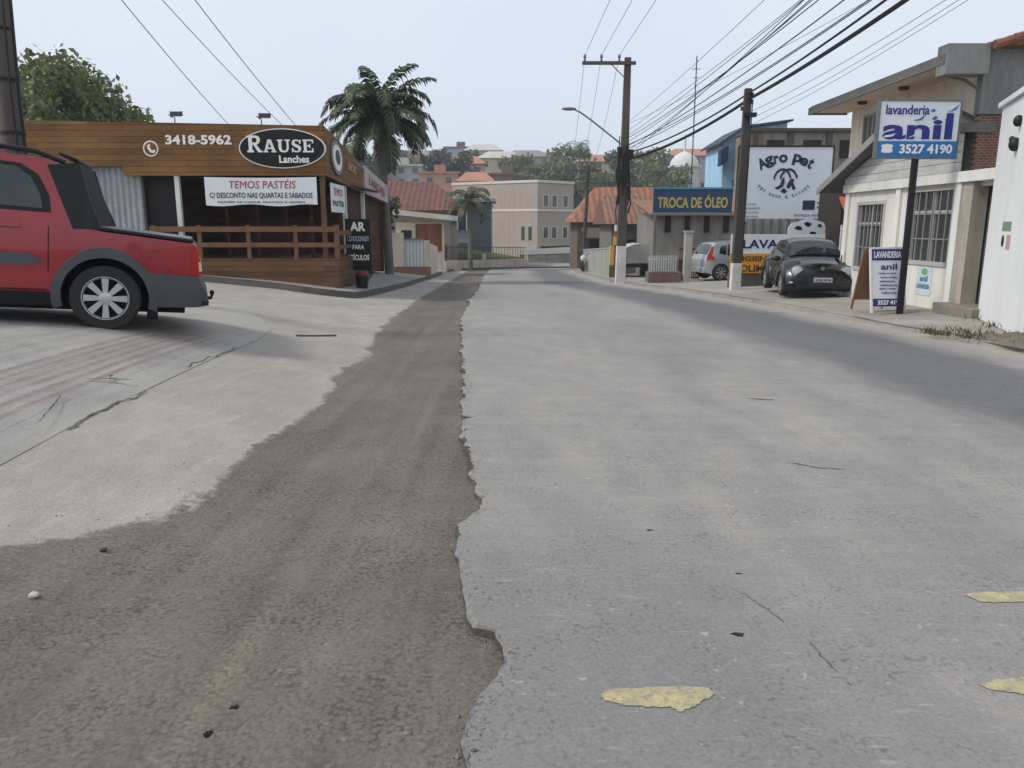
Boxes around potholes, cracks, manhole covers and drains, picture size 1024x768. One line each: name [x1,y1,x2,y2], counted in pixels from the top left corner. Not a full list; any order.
crack [730,586,851,685]
